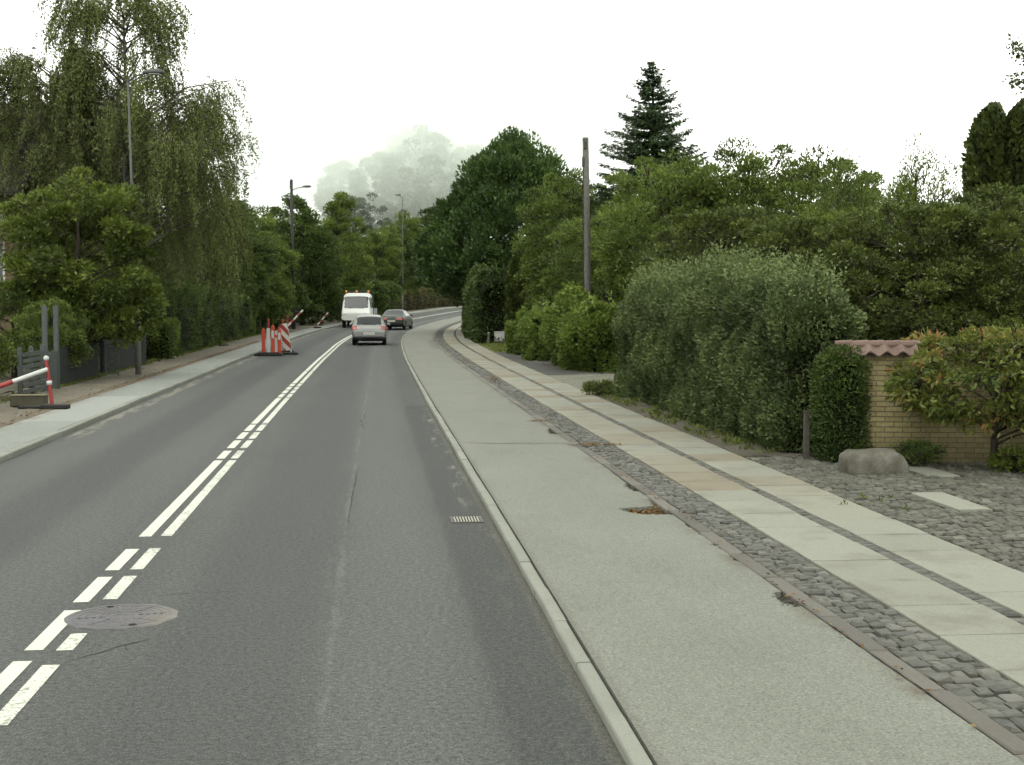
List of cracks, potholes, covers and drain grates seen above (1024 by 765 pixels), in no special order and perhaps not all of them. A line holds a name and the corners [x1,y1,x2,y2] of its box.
pothole [776,592,808,610]
manhole cover [64,604,178,630]
